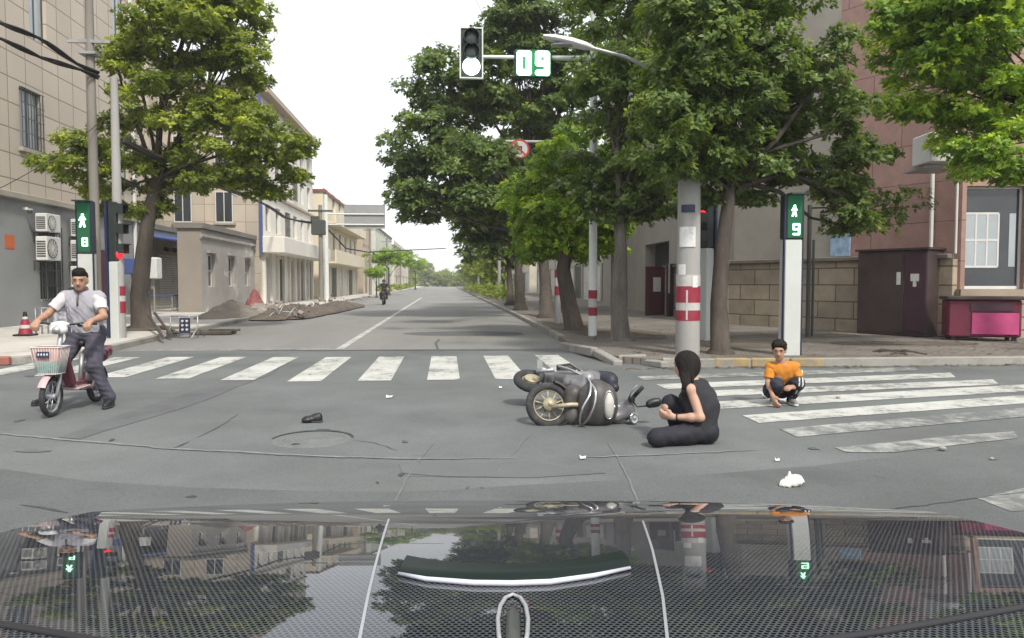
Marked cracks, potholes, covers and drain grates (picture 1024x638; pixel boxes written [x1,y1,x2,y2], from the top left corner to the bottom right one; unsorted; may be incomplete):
manhole cover [271,429,354,448]
crack [53,414,492,477]
